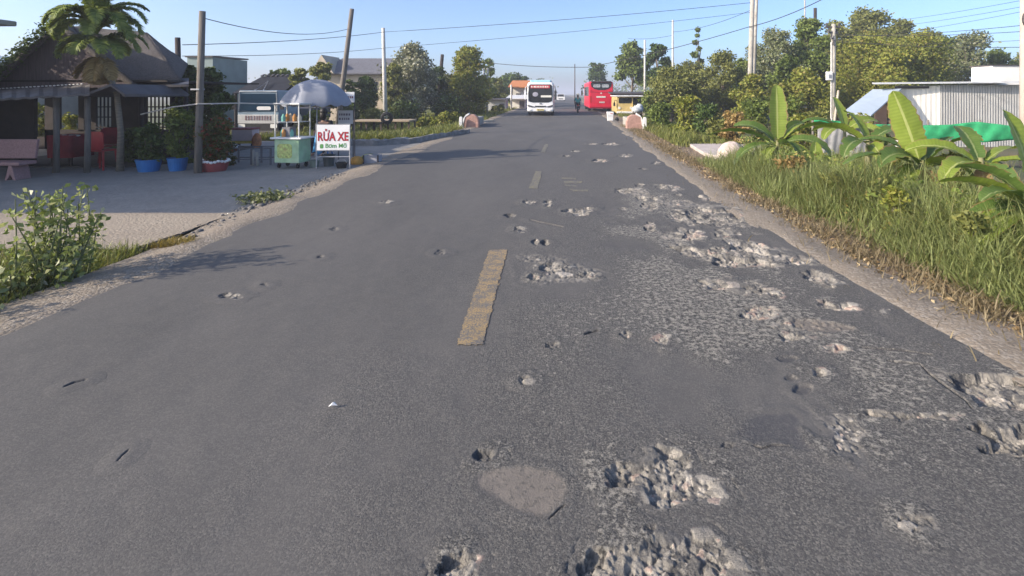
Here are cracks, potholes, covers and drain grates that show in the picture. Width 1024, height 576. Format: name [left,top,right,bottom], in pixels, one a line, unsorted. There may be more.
crack [41,371,107,396]
crack [854,344,988,418]
pothole [664,244,738,264]
pothole [536,198,561,210]
pothole [455,440,513,470]
pothole [662,208,696,224]
pothole [424,538,497,576]
pothole [204,288,260,306]
pothole [671,227,716,243]
pothole [514,198,540,207]
pothole [954,417,1024,466]
